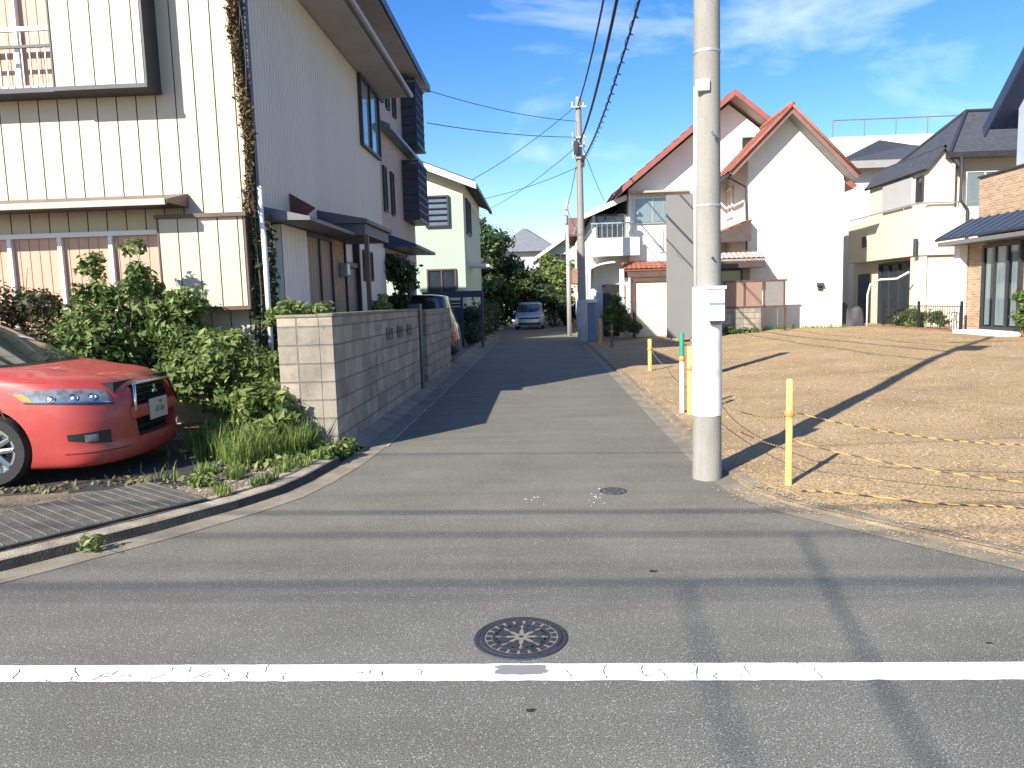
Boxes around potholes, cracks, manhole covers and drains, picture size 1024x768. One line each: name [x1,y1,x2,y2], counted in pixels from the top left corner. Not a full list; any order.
crack [70,667,132,681]
manhole cover [474,617,568,661]
manhole cover [600,487,627,495]
